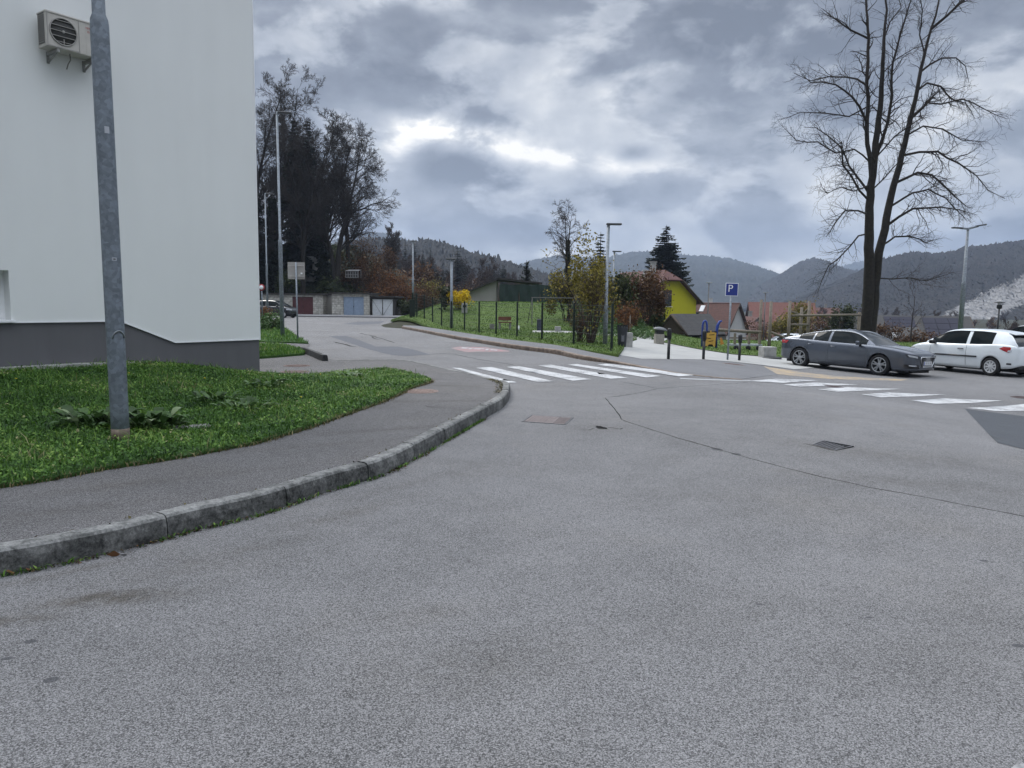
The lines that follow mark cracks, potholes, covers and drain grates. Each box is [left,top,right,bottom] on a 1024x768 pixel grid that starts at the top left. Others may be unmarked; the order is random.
drain grate [813,440,854,450]
manhole cover [522,415,574,425]
